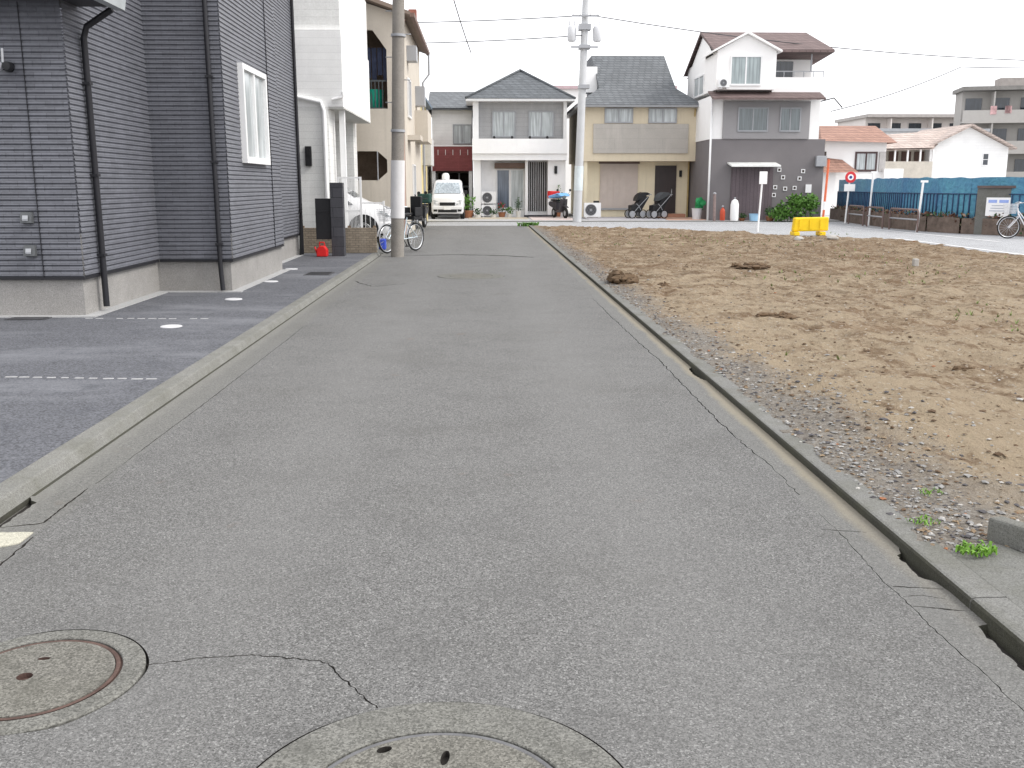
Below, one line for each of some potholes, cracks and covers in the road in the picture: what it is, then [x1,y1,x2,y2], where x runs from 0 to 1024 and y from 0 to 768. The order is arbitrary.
manhole cover [0,630,149,736]
crack [0,488,88,566]
crack [146,654,378,708]
crack [592,298,800,495]
manhole cover [256,702,624,768]
crack [821,515,1024,711]
